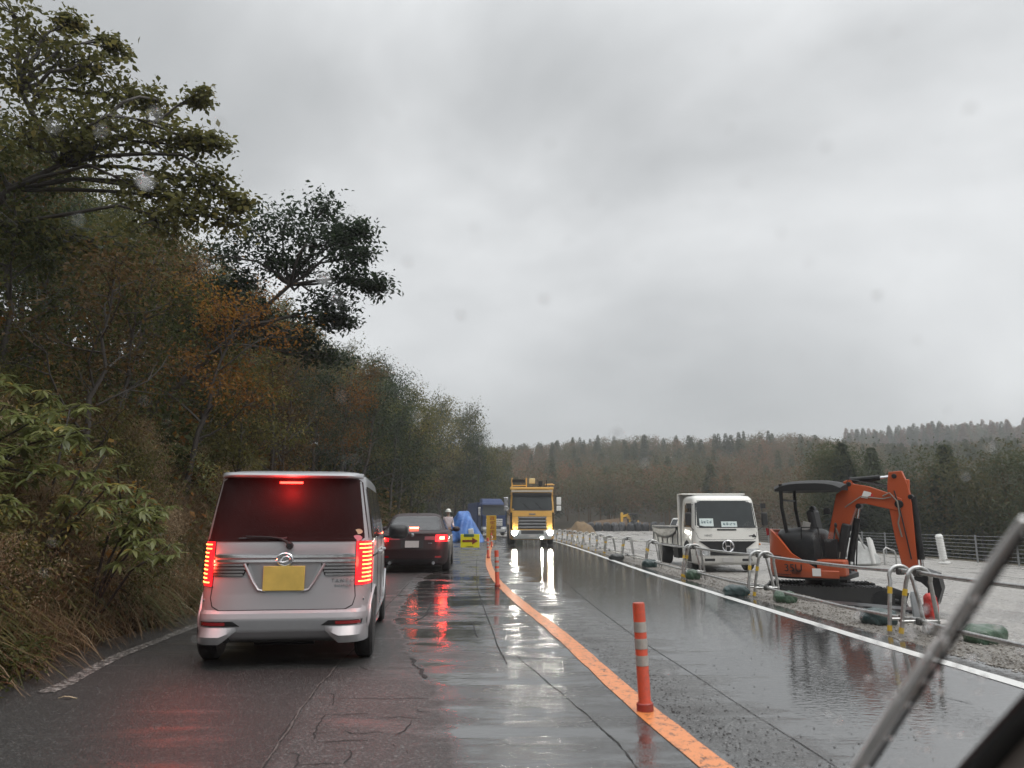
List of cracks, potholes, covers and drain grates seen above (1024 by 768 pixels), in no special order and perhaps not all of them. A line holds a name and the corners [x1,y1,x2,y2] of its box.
crack [261,583,432,768]
